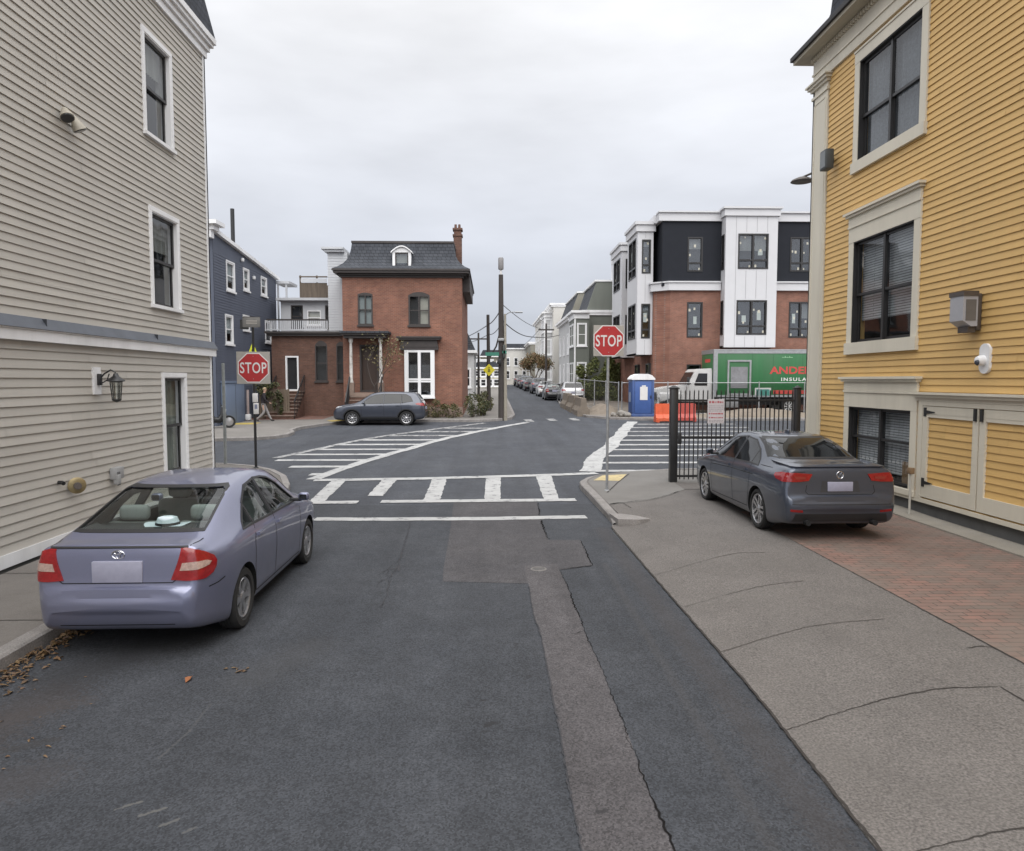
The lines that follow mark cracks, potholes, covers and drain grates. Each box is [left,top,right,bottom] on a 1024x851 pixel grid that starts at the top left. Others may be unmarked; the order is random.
crack [787,686,998,730]
crack [376,521,411,608]
crack [723,619,878,651]
crack [561,541,676,851]
crack [917,827,1024,851]
